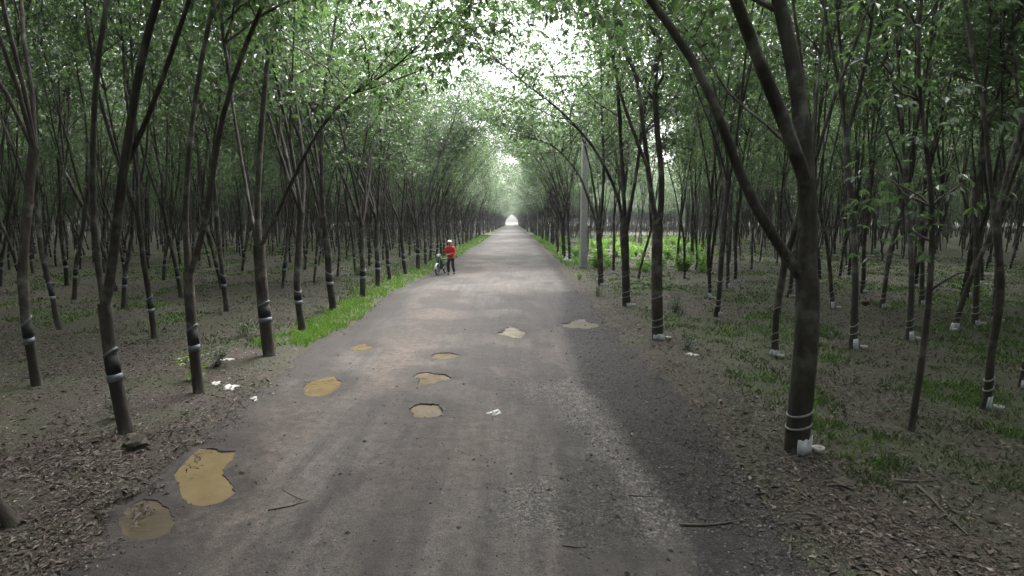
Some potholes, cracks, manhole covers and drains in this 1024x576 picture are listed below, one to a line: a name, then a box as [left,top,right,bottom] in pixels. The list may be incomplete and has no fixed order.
pothole [303,376,342,397]
pothole [118,499,175,541]
pothole [430,352,461,360]
pothole [561,319,600,329]
pothole [497,325,527,338]
pothole [409,403,445,418]
pothole [413,371,452,386]
pothole [174,448,236,506]
